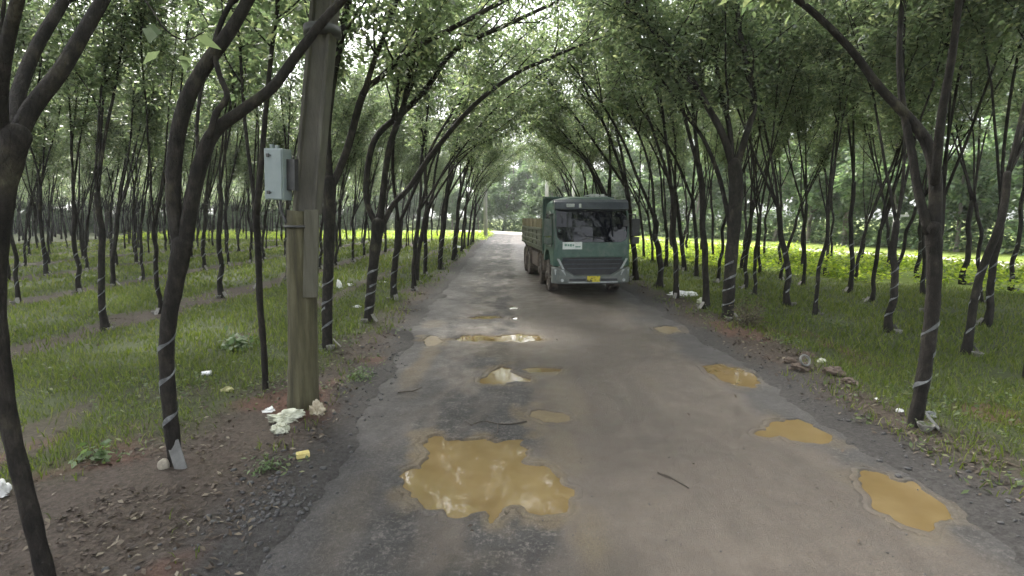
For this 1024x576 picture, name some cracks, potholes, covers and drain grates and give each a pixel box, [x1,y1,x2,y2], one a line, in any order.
pothole [849,466,967,538]
pothole [748,417,842,447]
pothole [517,366,567,374]
pothole [698,363,765,390]
pothole [419,335,446,347]
pothole [475,365,536,386]
pothole [391,432,583,529]
pothole [523,407,576,425]
pothole [651,325,685,335]
pothole [451,333,547,343]
